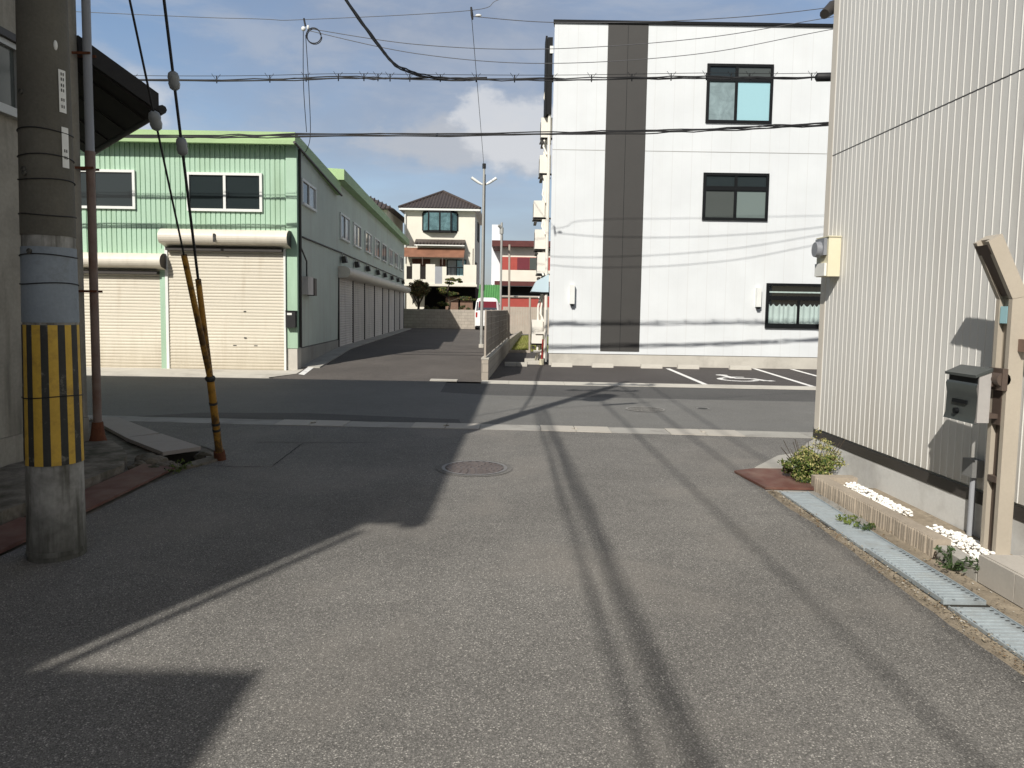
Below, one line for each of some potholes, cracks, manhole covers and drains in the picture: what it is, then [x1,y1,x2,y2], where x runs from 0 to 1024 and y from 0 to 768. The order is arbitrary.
drain grate [866,548,986,605]
manhole cover [436,460,513,477]
drain grate [779,491,900,551]
